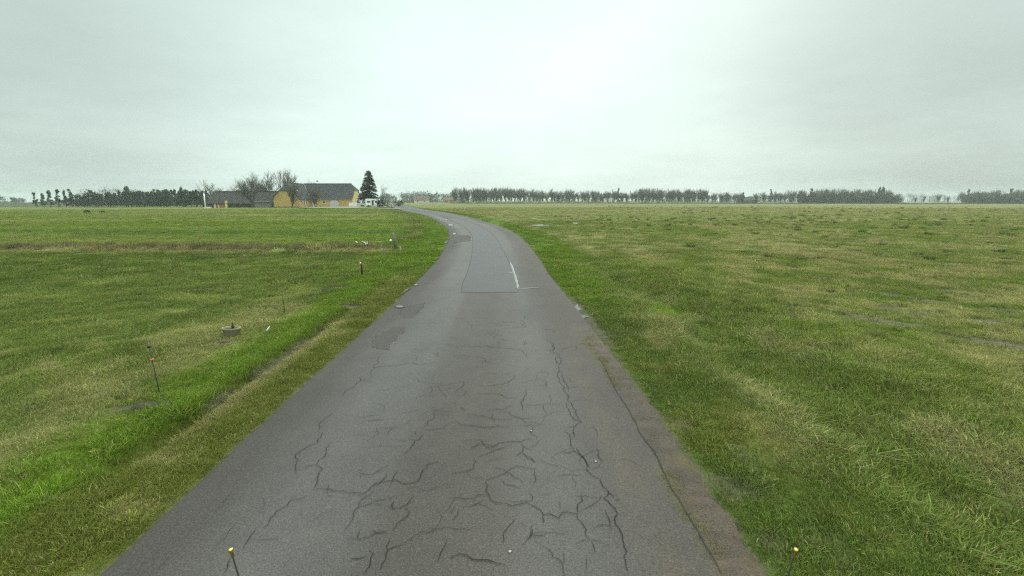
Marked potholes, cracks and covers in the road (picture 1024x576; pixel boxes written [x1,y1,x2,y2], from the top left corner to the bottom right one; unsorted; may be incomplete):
crack [217,322,628,572]
